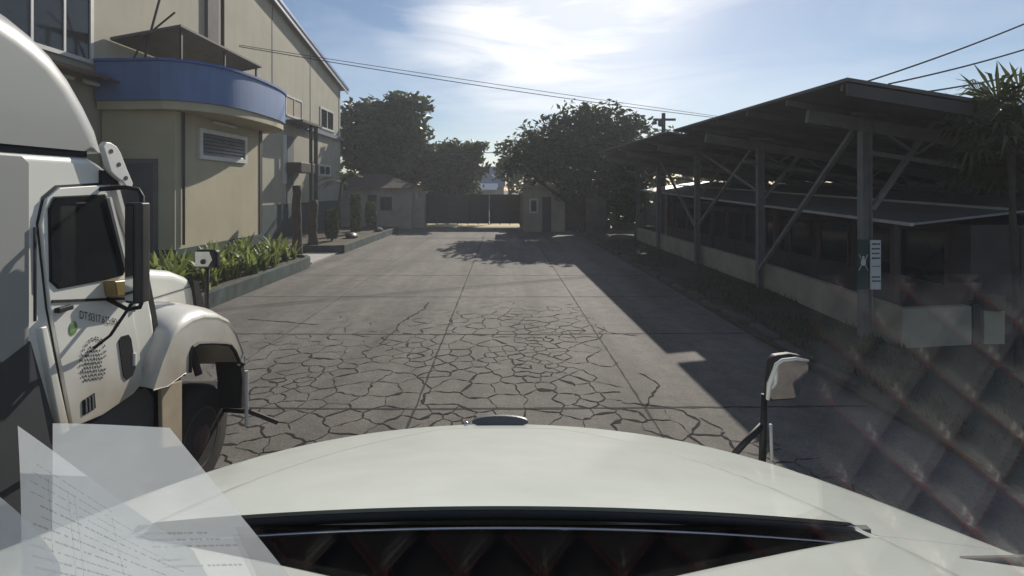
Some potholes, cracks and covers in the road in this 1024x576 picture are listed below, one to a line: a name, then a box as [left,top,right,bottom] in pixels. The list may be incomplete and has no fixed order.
crack [208,299,880,502]
